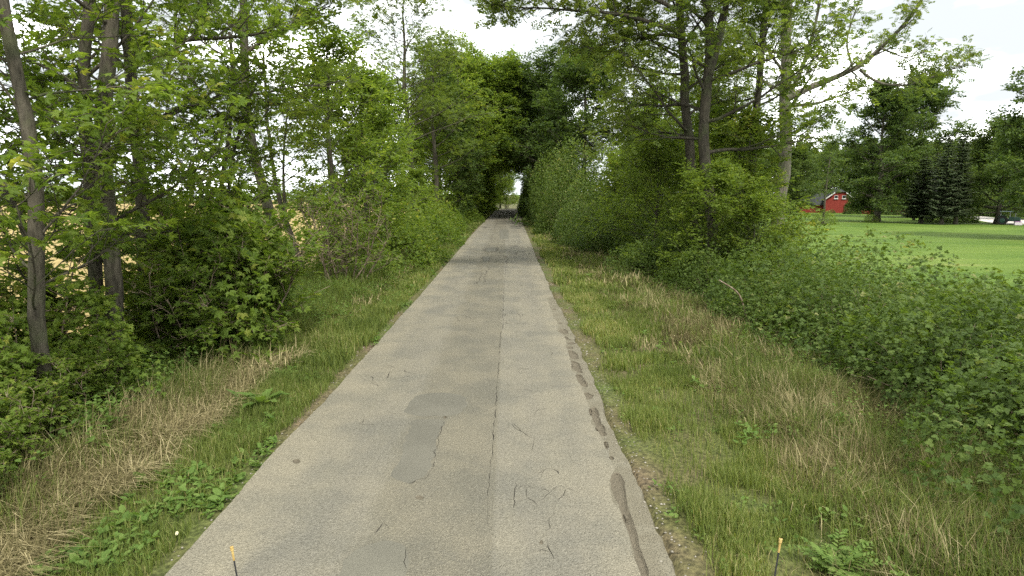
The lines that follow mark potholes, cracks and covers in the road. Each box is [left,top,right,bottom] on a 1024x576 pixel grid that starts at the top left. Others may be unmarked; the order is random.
crack [513,468,578,526]
